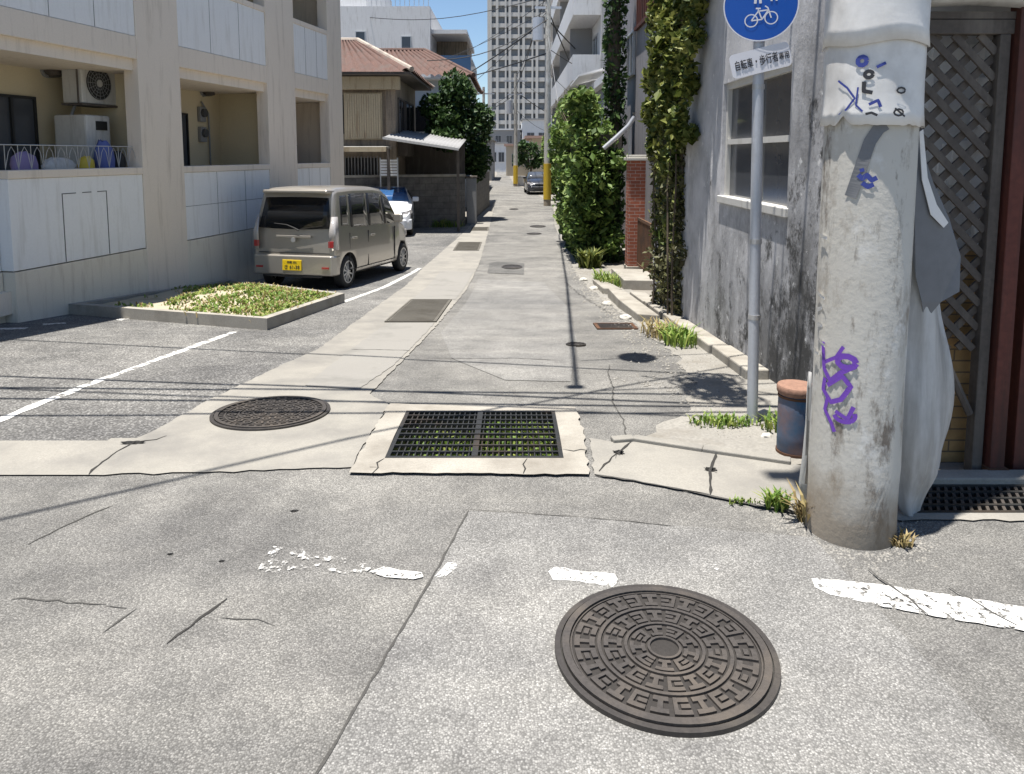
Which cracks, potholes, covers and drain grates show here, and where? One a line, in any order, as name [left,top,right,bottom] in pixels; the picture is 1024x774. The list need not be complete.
crack [596,454,793,512]
crack [167,598,275,643]
crack [14,597,137,632]
crack [868,568,928,614]
drain grate [917,484,1024,513]
manhole cover [555,584,781,738]
crack [29,506,111,544]
manhole cover [209,396,330,431]
crack [89,435,167,474]
drain grate [385,411,564,458]
crack [949,586,1017,625]
crack [607,365,627,435]
